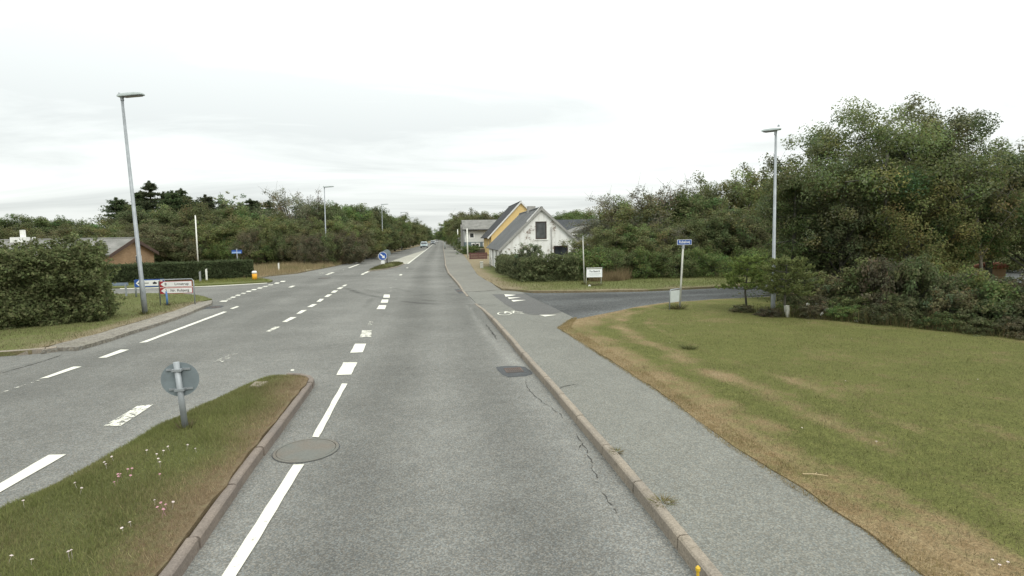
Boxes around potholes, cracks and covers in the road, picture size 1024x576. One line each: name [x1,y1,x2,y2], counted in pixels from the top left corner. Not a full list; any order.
manhole cover [272,438,340,463]
crack [577,436,617,513]
